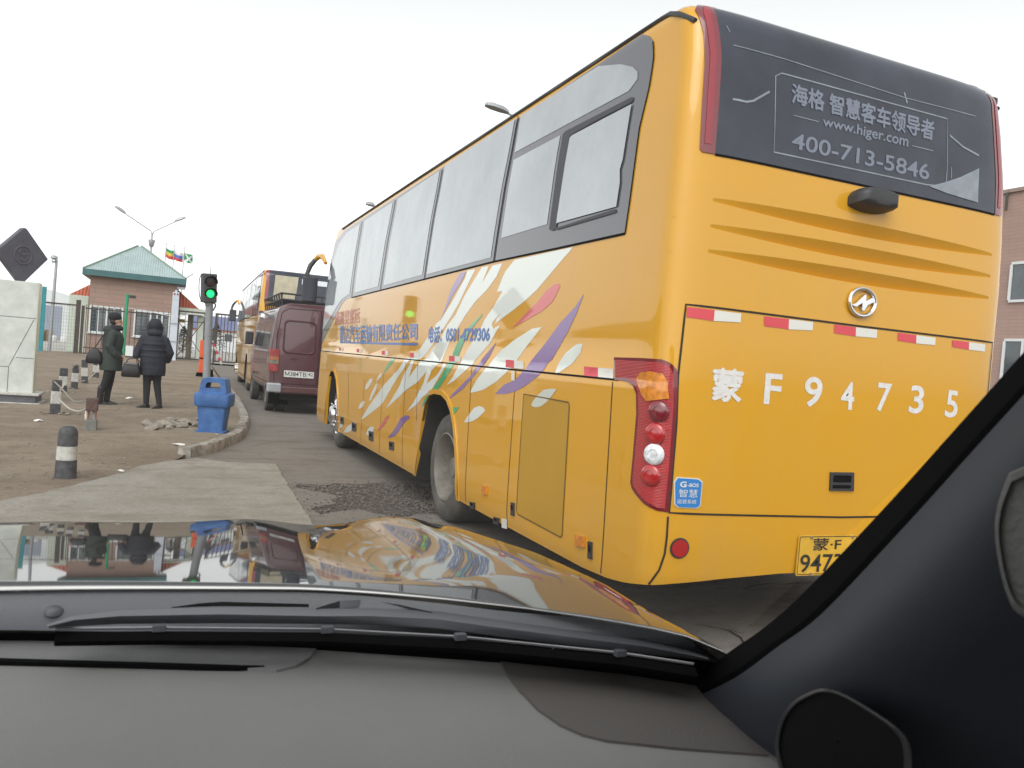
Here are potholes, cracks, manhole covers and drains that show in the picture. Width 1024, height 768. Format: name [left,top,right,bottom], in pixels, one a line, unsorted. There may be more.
crack [694,624,744,642]
pothole [293,480,438,519]
